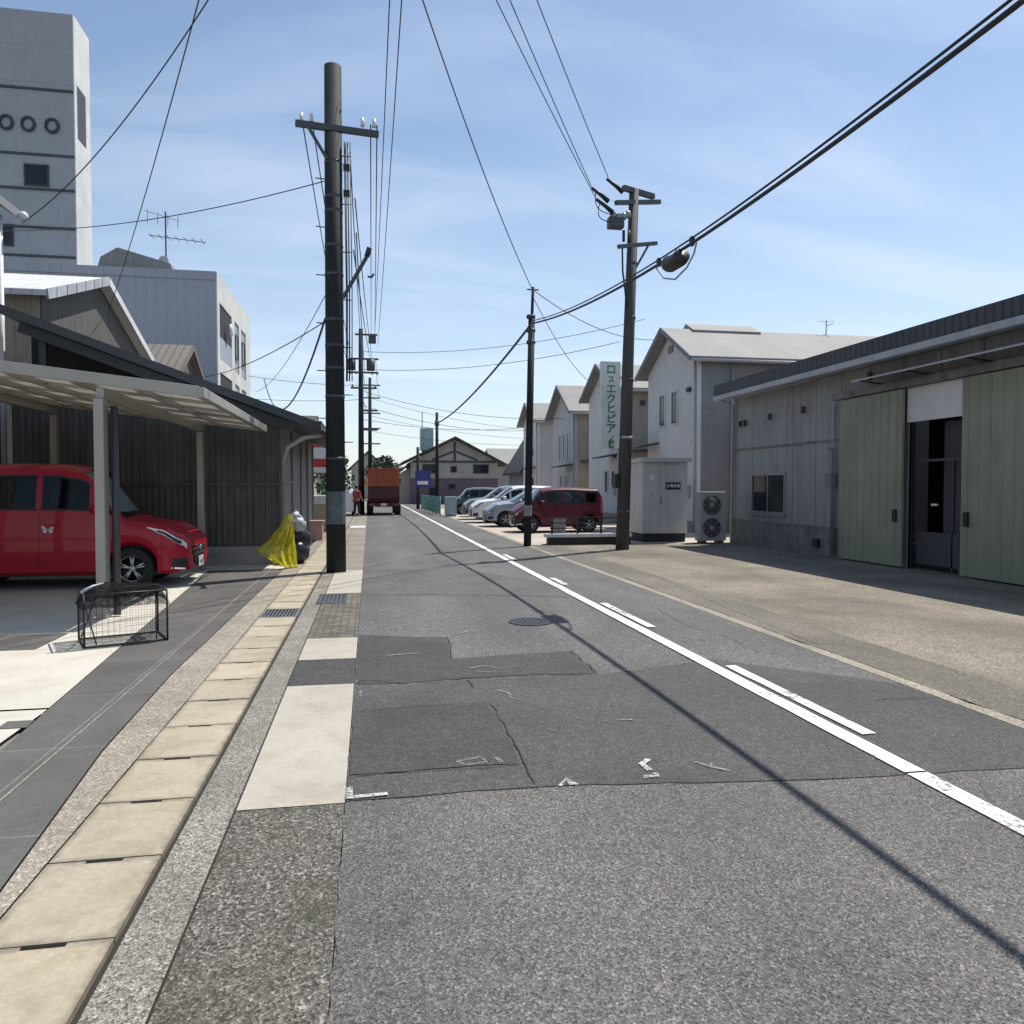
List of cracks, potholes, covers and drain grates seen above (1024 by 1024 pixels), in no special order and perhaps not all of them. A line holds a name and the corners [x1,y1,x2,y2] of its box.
crack [354,650,597,782]
drain grate [259,608,301,618]
manhole cover [508,617,553,626]
